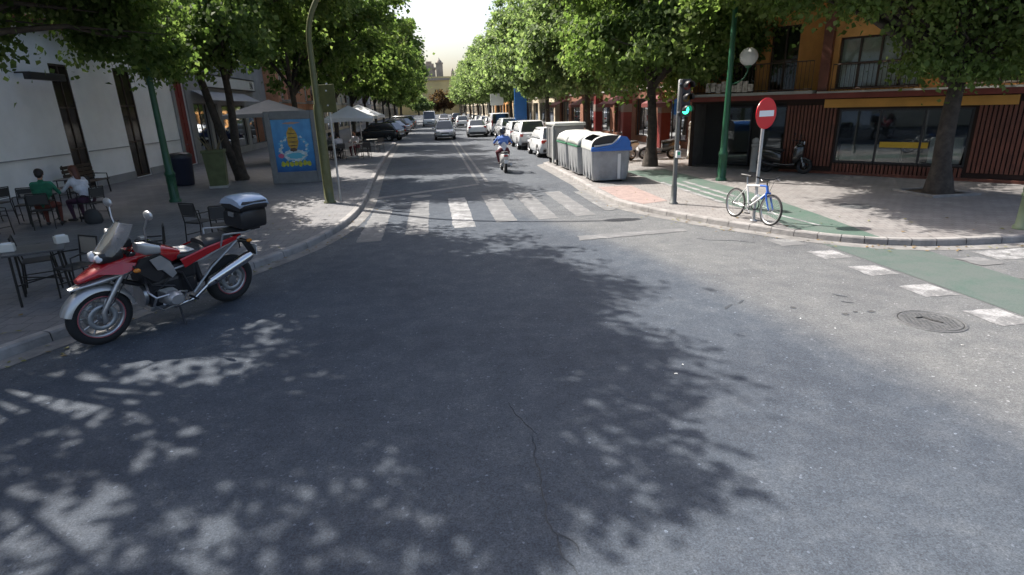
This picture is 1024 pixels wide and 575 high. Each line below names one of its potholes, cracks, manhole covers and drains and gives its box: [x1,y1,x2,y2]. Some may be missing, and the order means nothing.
crack [509,403,581,575]
manhole cover [893,310,969,333]
